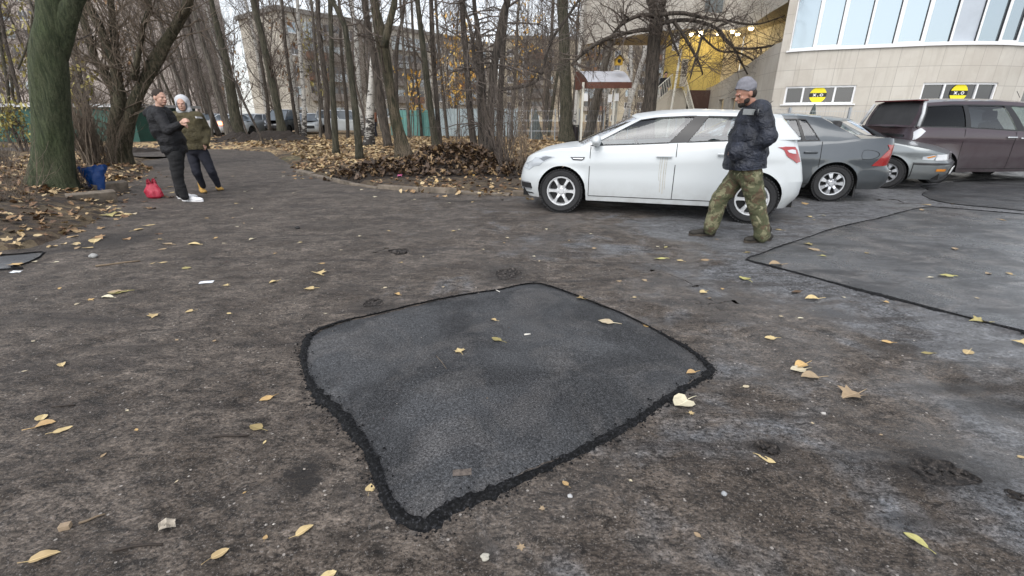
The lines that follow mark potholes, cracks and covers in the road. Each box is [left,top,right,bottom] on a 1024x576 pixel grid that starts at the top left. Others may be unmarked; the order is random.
pothole [754,440,781,455]
pothole [496,268,522,280]
pothole [363,297,383,307]
pothole [907,458,983,485]
